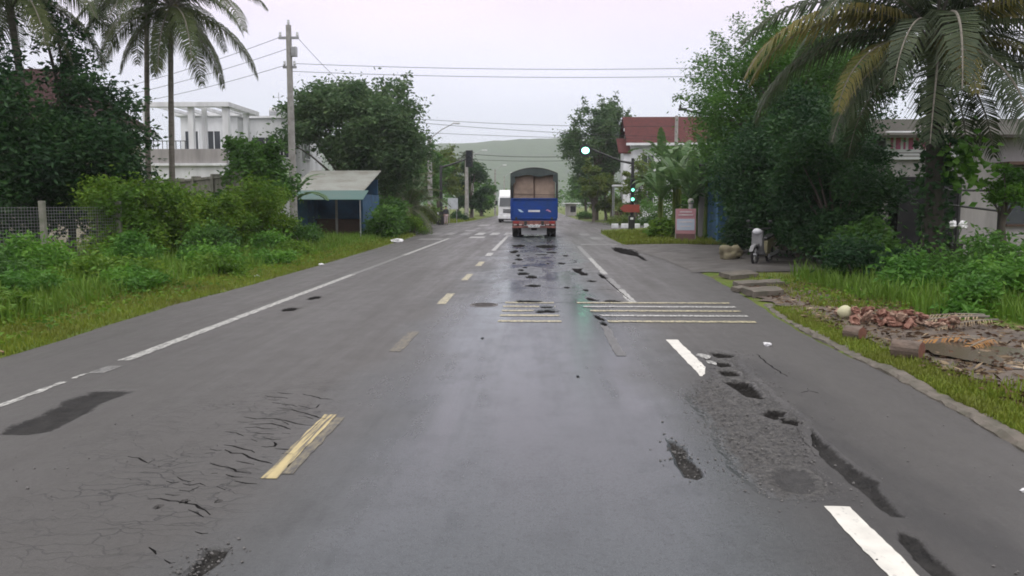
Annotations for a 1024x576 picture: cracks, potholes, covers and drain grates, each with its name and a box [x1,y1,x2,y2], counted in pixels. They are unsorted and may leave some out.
pothole [721,379,769,400]
pothole [180,546,232,576]
pothole [778,417,805,426]
crack [154,392,324,534]
pothole [895,529,960,576]
pothole [797,423,912,518]
pothole [760,408,790,420]
pothole [665,438,706,480]
